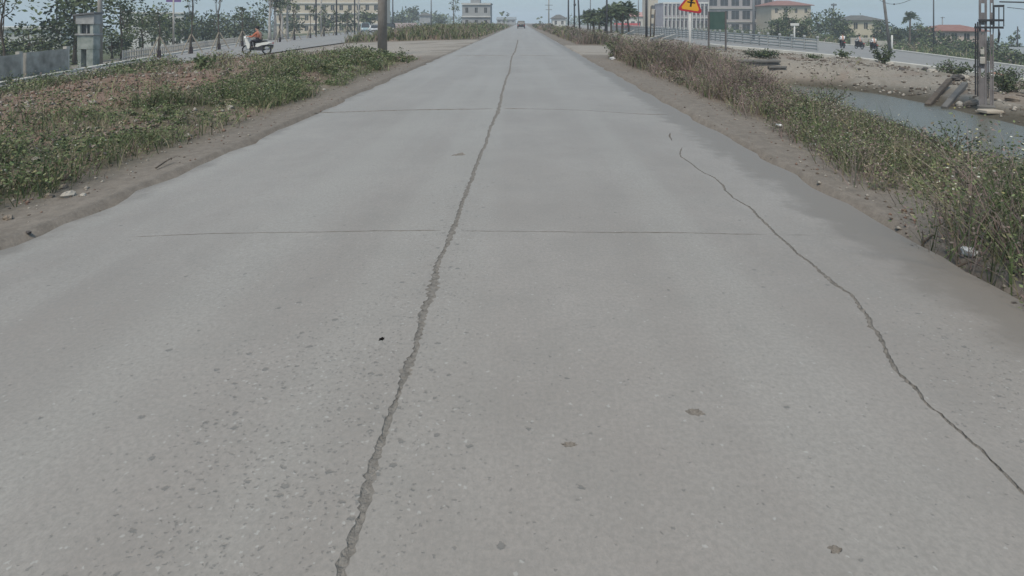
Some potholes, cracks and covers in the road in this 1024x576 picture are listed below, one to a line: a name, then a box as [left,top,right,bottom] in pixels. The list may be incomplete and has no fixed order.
crack [335,40,518,576]
crack [669,133,1024,495]
